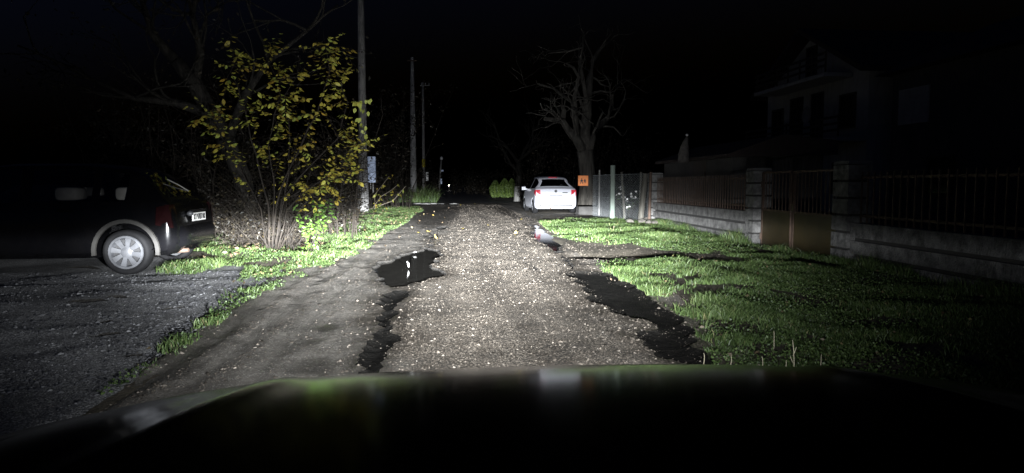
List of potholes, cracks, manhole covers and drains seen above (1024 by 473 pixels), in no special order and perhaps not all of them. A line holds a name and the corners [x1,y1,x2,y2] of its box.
pothole [371,235,447,287]
pothole [526,224,568,253]
pothole [564,271,714,364]
pothole [355,290,410,374]
